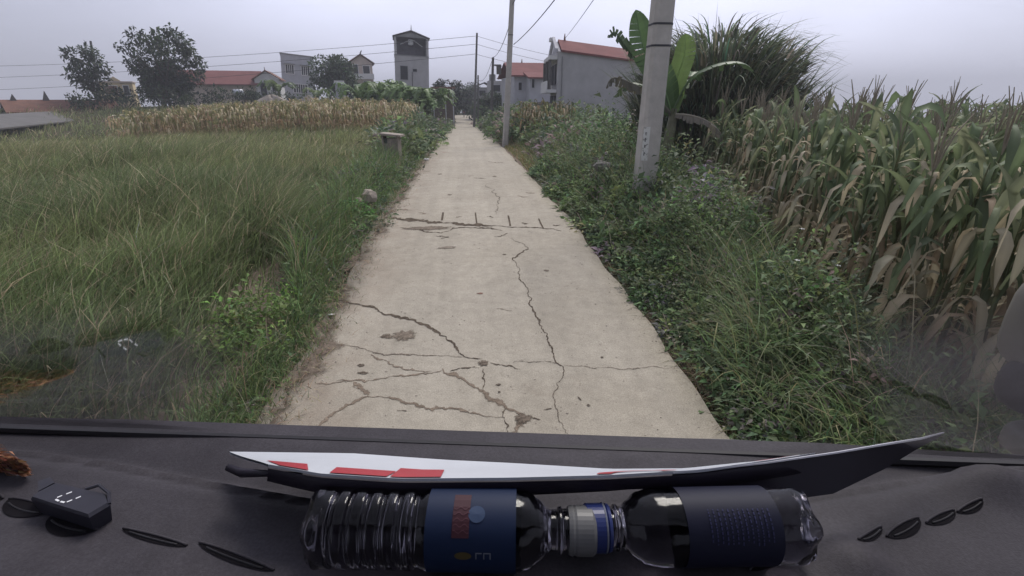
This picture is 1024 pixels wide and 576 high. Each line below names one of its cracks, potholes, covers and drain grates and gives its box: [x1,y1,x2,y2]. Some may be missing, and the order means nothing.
pothole [393,330,415,341]
crack [315,226,568,434]
